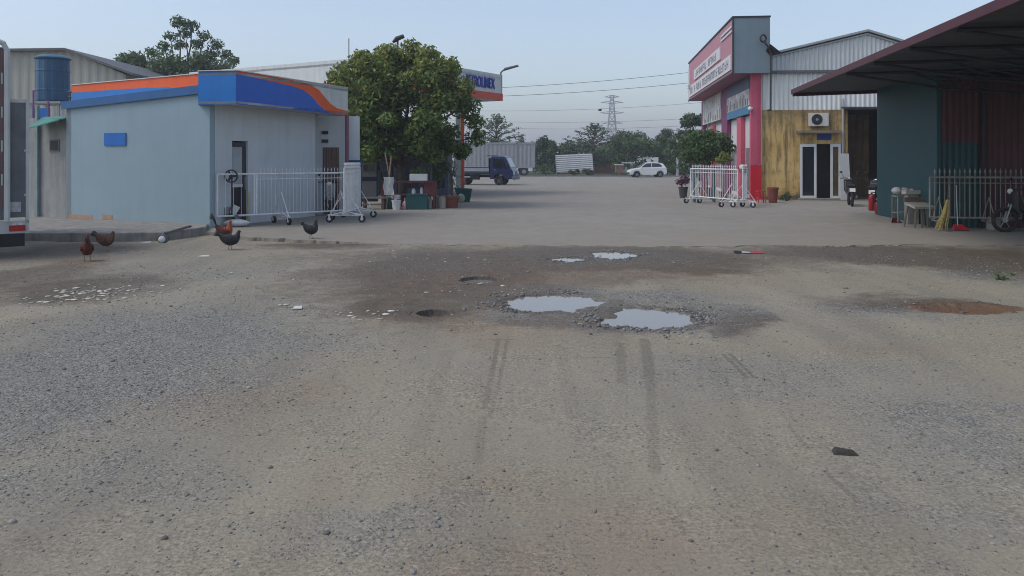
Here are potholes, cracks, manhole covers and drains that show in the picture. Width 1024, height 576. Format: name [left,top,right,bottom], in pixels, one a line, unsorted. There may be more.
pothole [576,304,718,334]
pothole [455,275,502,285]
pothole [586,250,645,261]
pothole [411,308,454,318]
pothole [487,292,625,319]
pothole [902,301,1024,315]
